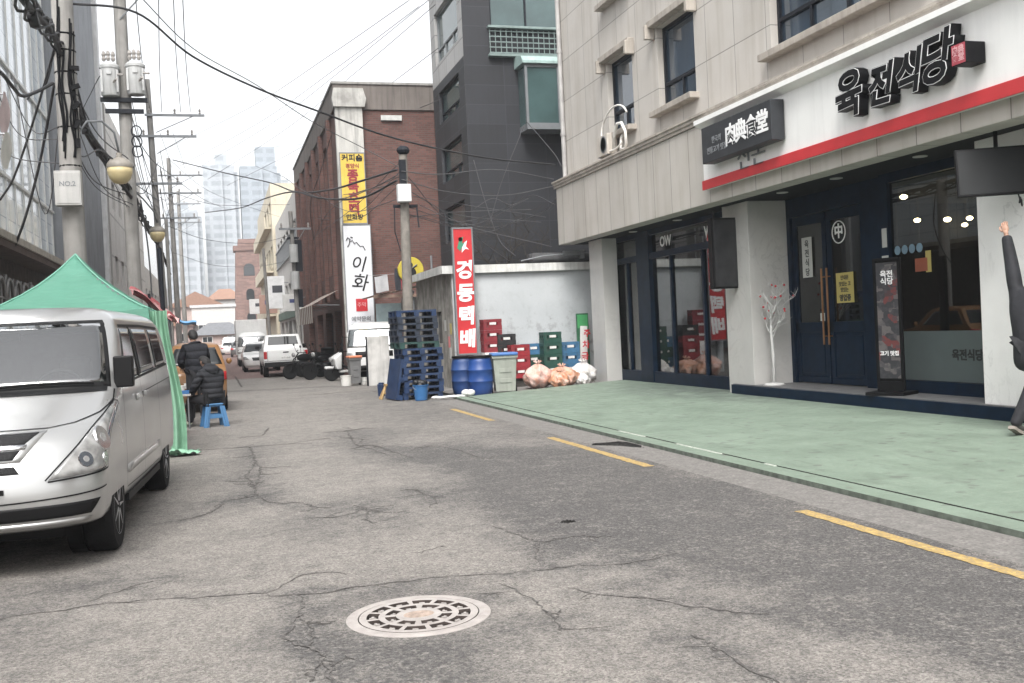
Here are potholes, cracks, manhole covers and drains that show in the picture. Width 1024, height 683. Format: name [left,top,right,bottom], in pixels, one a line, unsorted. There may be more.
crack [179,427,499,524]
manhole cover [346,595,491,638]
crack [0,526,766,683]
